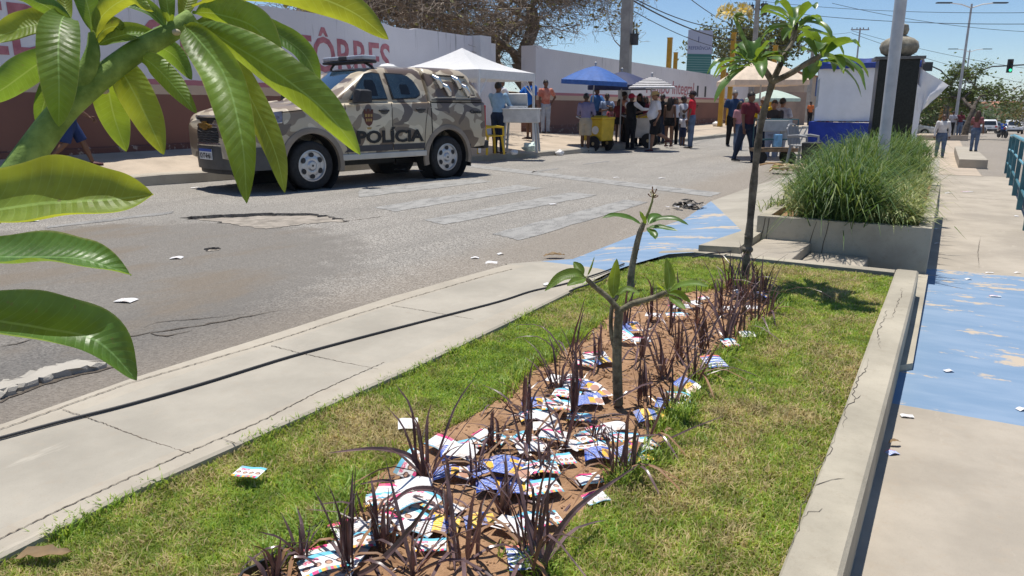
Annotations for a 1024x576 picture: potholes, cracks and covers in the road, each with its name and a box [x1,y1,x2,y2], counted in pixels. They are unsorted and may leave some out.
pothole [182,213,348,229]
crack [3,310,278,346]
